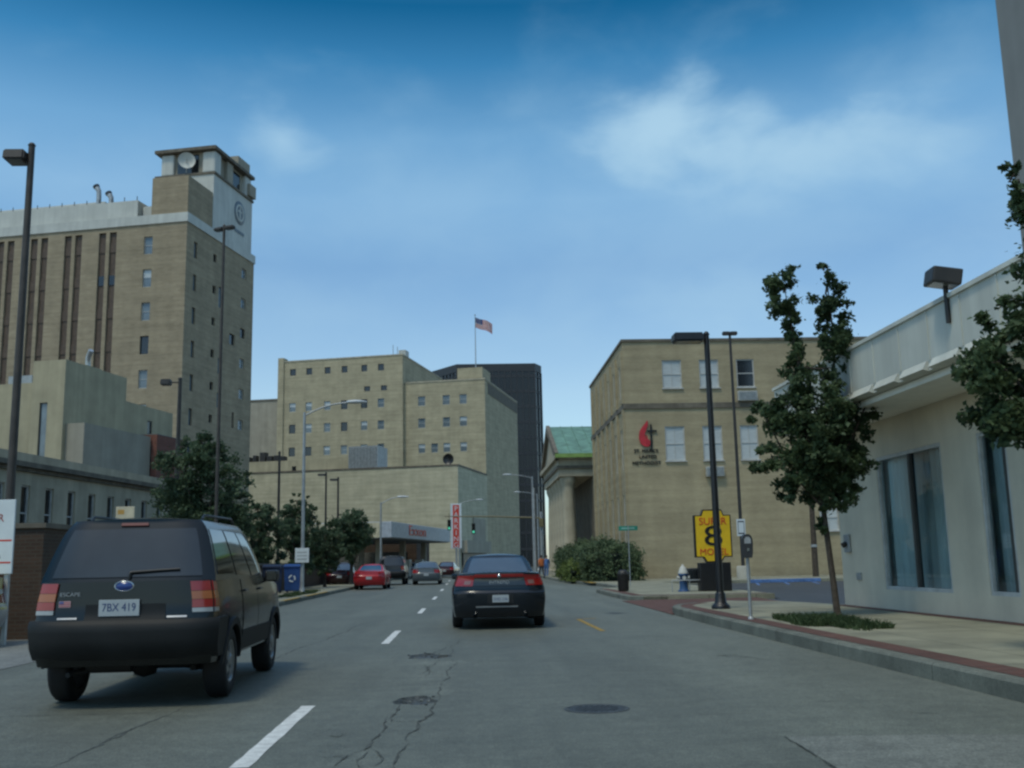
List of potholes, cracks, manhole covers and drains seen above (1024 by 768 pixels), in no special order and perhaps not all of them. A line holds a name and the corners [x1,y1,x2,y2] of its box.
pothole [392,695,438,705]
crack [319,643,458,767]
manhole cover [564,704,630,714]
